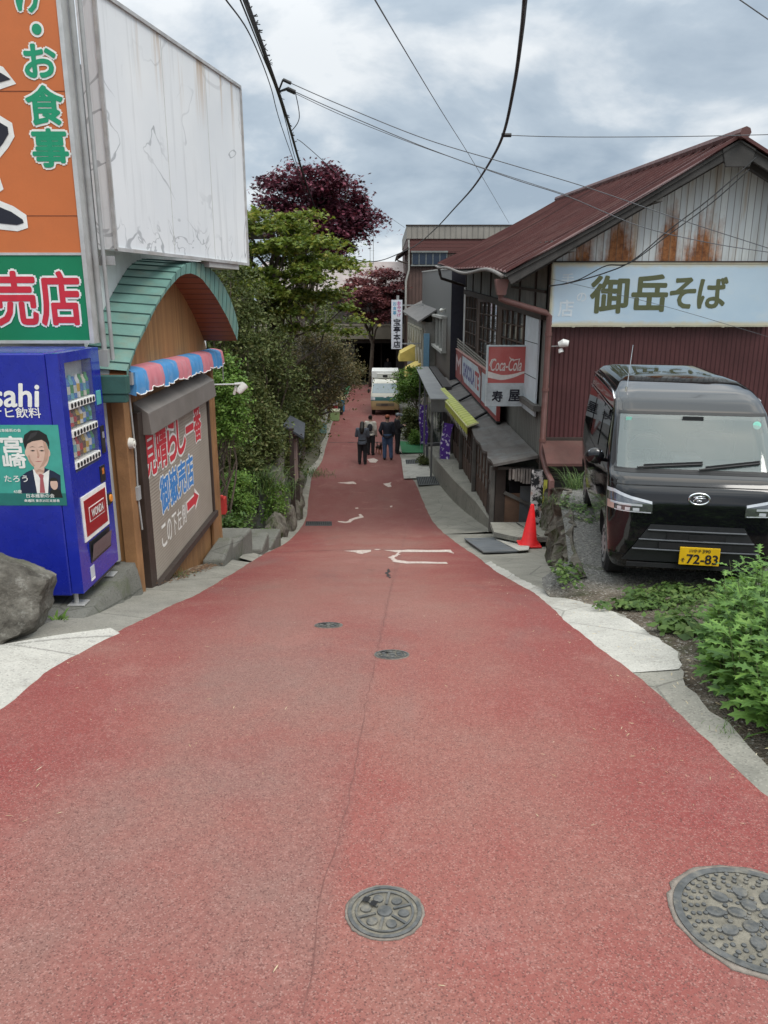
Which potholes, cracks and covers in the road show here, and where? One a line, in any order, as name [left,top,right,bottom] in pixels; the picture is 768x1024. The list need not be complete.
manhole cover [374,649,409,660]
manhole cover [345,885,425,941]
manhole cover [666,865,768,981]
